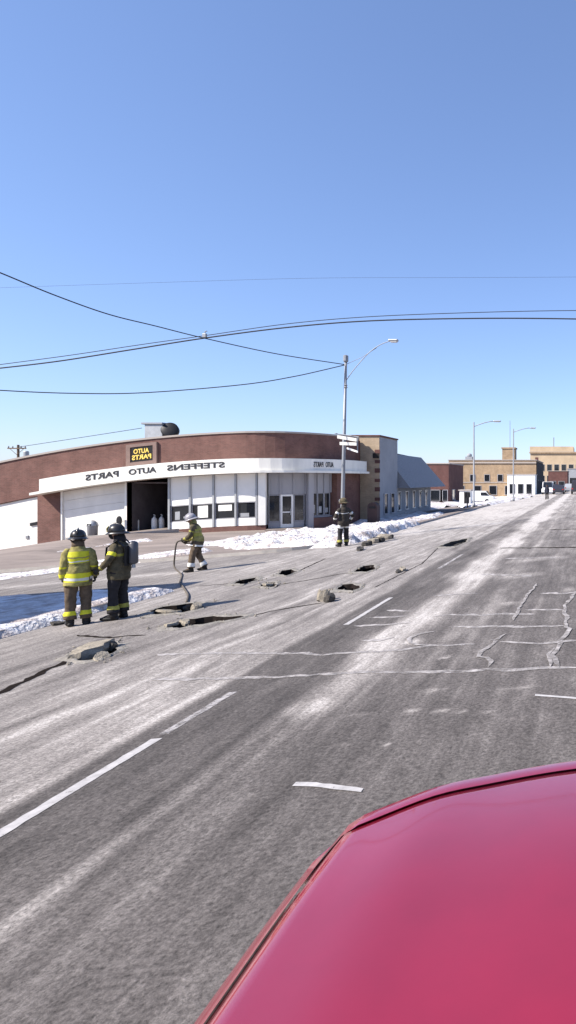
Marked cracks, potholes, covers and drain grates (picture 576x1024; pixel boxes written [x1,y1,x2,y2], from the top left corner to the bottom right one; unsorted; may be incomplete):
crack [0,661,67,694]
pothole [435,537,471,548]
pothole [156,613,254,632]
crack [150,547,576,681]
pothole [270,568,302,586]
pothole [347,564,382,574]
pothole [330,582,365,593]
pothole [53,641,131,664]
pothole [137,601,212,619]
pothole [224,576,264,586]
